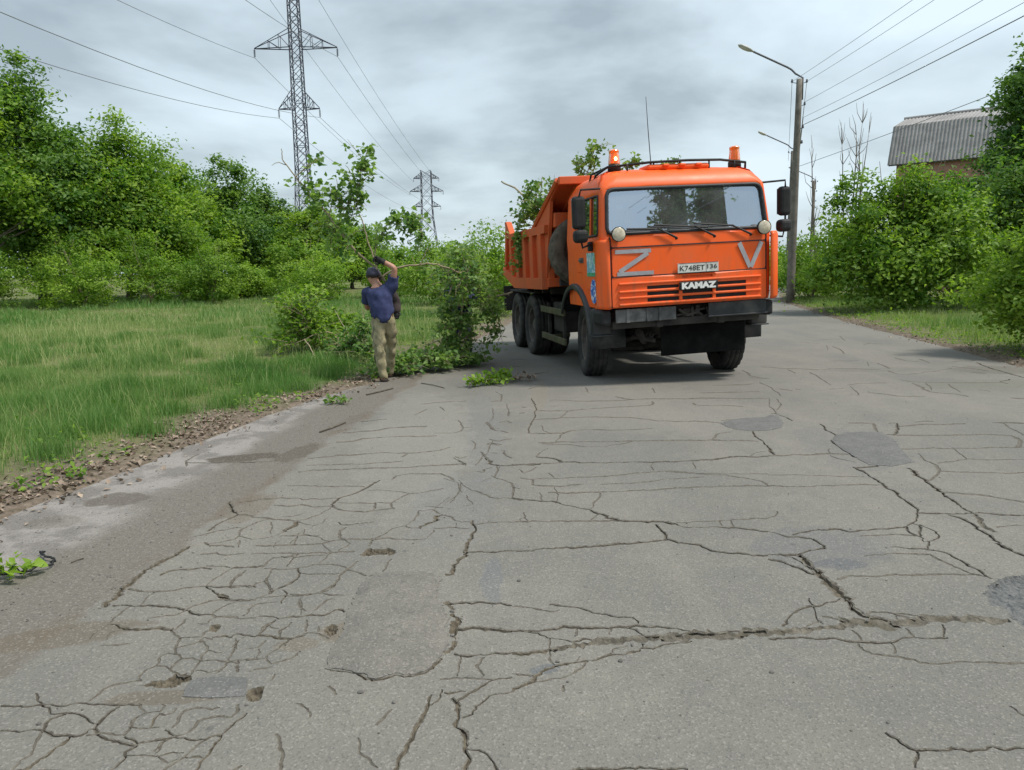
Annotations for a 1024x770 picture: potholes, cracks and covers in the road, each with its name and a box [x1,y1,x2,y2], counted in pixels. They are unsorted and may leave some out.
pothole [324,624,338,636]
crack [1,336,1024,770]
pothole [360,548,396,556]
pothole [246,687,264,702]
pothole [142,673,192,688]
